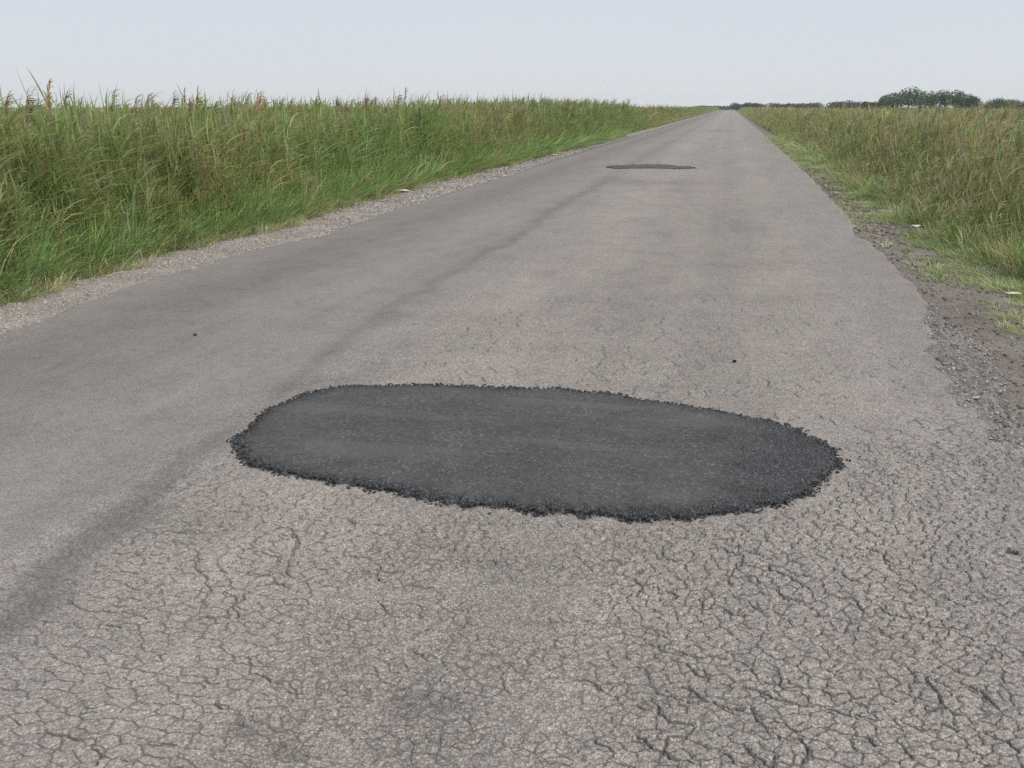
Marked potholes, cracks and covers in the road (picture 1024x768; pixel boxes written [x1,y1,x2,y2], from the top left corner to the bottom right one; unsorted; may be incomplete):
crack [388,294,1024,499]
crack [0,381,621,768]
crack [561,478,1024,768]
